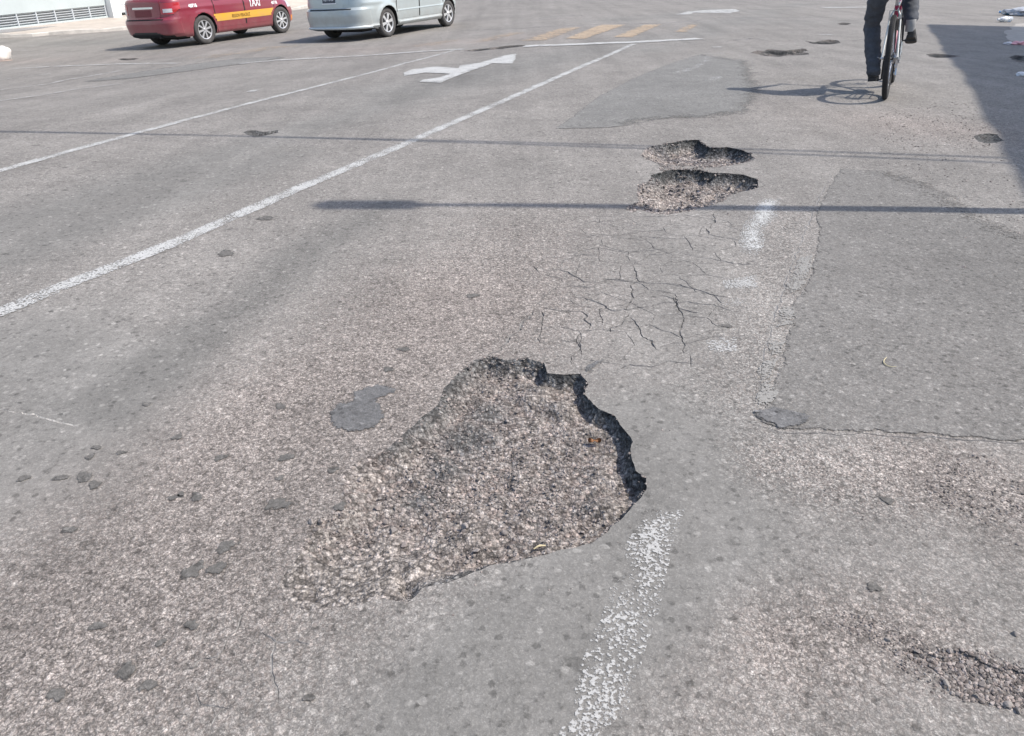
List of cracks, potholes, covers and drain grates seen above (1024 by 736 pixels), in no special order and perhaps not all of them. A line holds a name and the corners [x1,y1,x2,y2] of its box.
crack [484,209,750,370]
pothole [641,140,755,167]
pothole [751,48,809,57]
pothole [627,169,759,214]
pothole [902,648,1024,708]
pothole [974,133,1003,144]
pothole [280,356,647,612]
